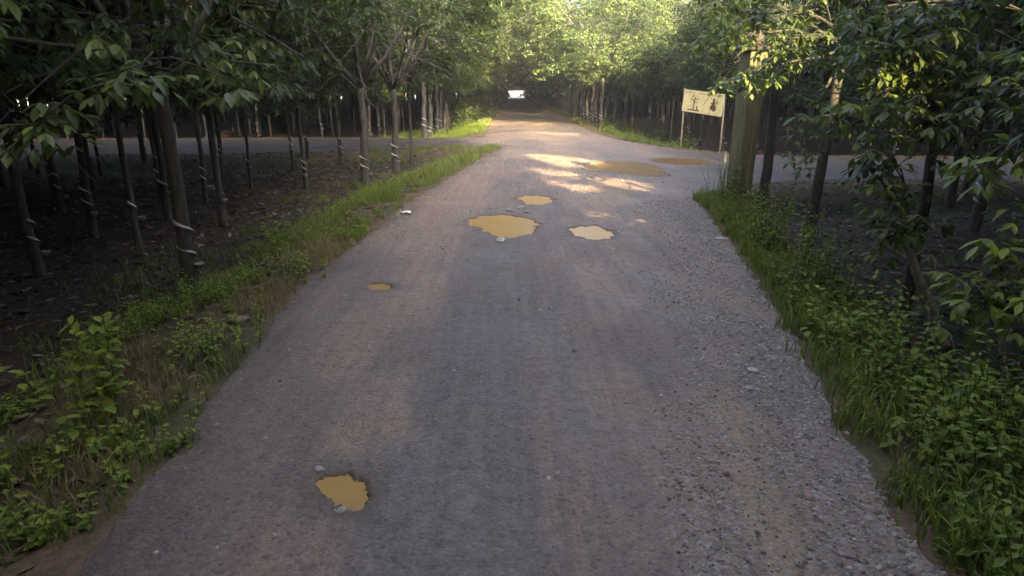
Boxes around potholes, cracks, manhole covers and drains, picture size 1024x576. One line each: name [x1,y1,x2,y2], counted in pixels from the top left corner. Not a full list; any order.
pothole [295,460,390,522]
pothole [462,213,547,240]
pothole [575,161,677,178]
pothole [357,280,403,292]
pothole [510,194,563,206]
pothole [644,157,721,166]
pothole [560,224,622,241]
